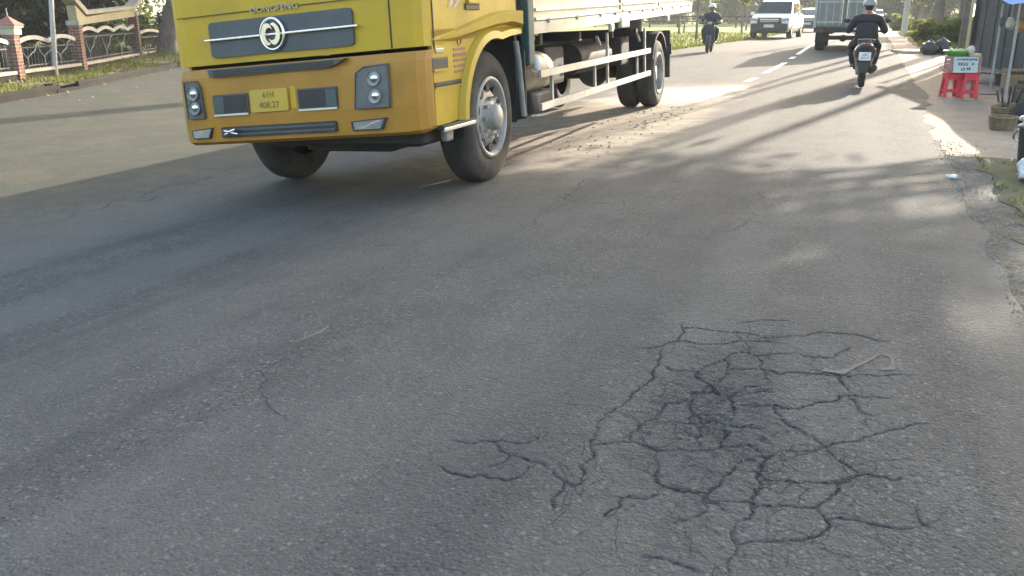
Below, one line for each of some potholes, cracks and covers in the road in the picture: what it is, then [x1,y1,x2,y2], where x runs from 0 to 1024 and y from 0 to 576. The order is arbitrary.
crack [533,178,625,225]
crack [522,310,960,576]
crack [217,358,300,425]
crack [430,432,548,489]
